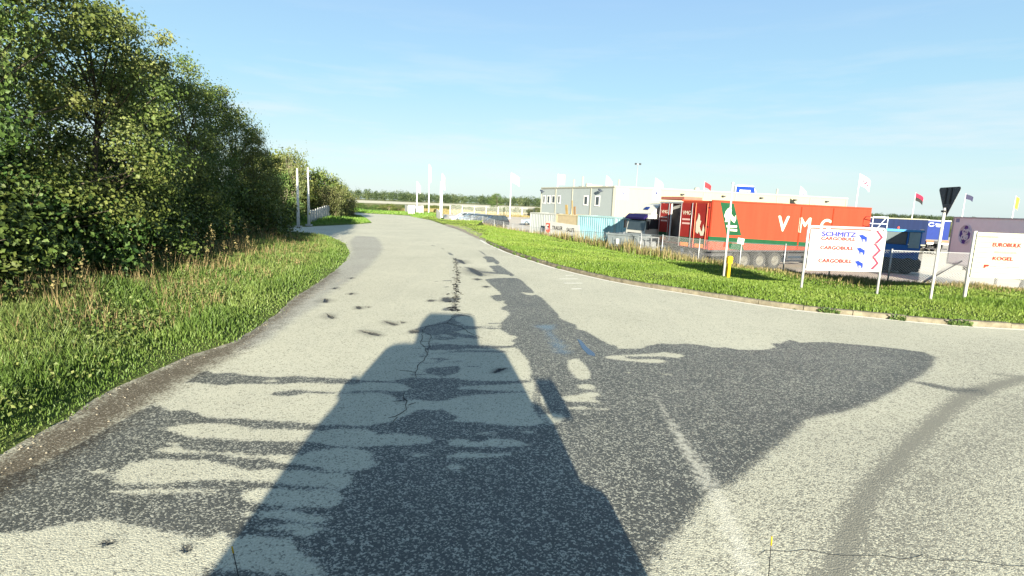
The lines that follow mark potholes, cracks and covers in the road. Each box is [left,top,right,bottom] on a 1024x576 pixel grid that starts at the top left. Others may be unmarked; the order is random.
pothole [314,312,340,320]
crack [759,549,1008,566]
pothole [351,328,388,338]
pothole [375,319,402,327]
